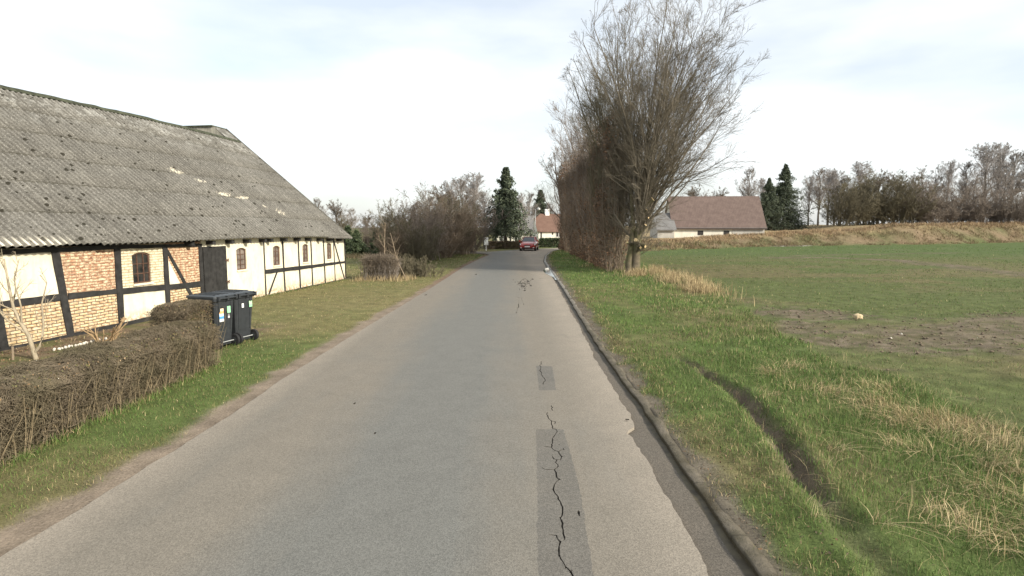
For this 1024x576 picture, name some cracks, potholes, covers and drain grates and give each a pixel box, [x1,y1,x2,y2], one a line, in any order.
crack [543,405,574,576]
